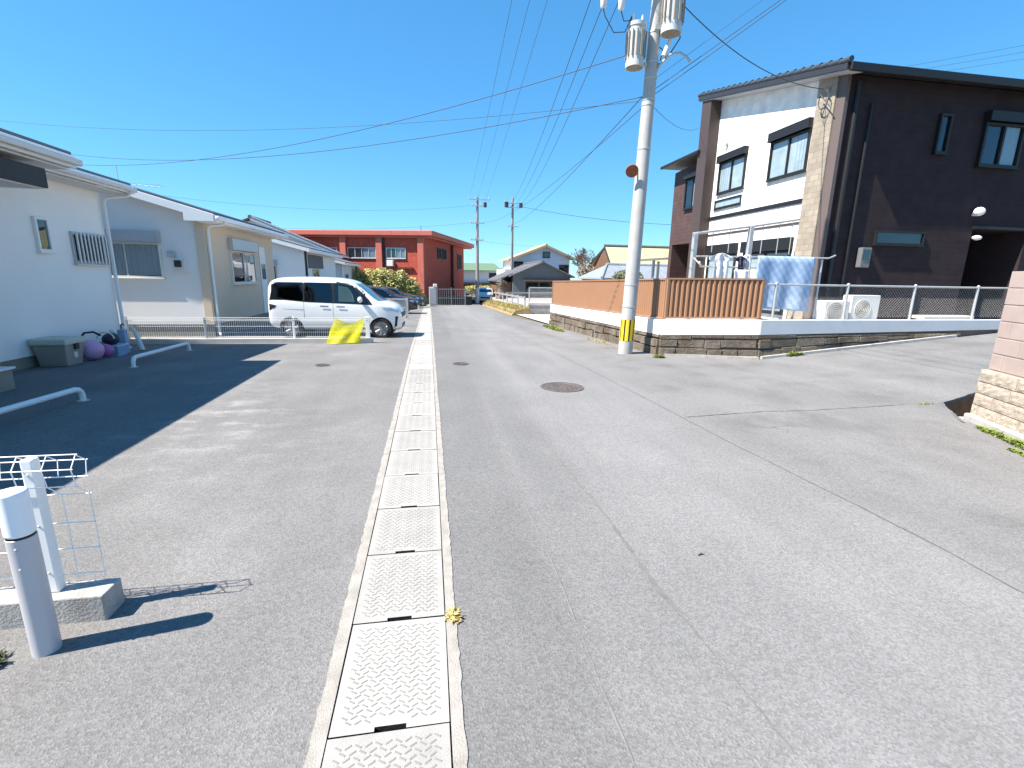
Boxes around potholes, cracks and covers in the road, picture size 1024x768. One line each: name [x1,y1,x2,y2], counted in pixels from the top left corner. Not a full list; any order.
manhole cover [540,382,584,392]
